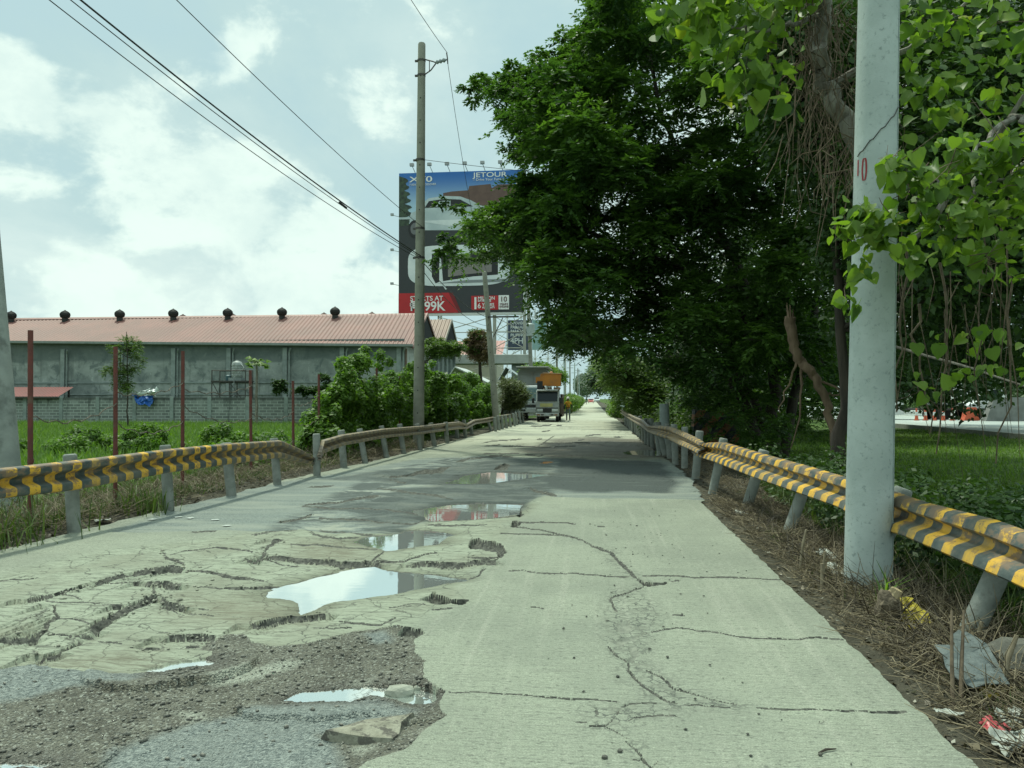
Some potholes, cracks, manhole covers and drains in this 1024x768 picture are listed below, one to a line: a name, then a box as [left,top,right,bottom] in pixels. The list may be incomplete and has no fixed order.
pothole [266,567,471,615]
pothole [354,529,456,551]
pothole [445,471,549,484]
crack [0,424,719,666]
crack [575,646,737,768]
pothole [412,502,523,522]
pothole [0,625,447,768]
pothole [469,538,507,558]
